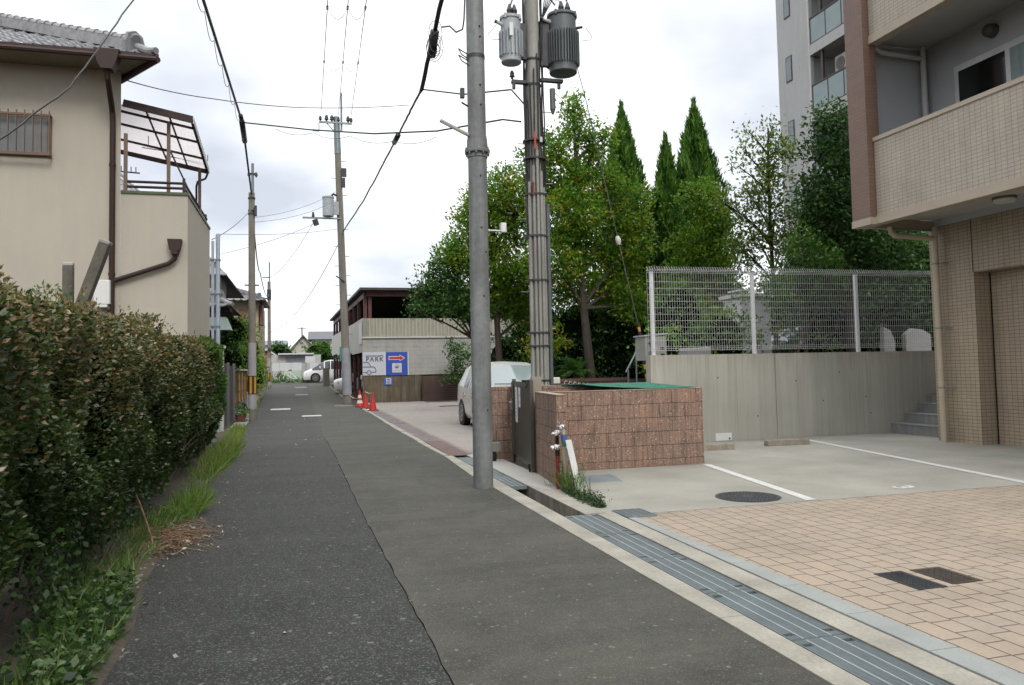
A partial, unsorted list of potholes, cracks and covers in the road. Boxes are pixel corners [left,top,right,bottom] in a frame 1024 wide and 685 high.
drain grate [612,508,657,519]
drain grate [564,514,632,536]
manhole cover [715,491,781,502]
drain grate [599,532,682,560]
drain grate [493,474,527,490]
drain grate [793,634,950,685]
drain grate [706,589,844,642]
drain grate [644,556,750,594]
